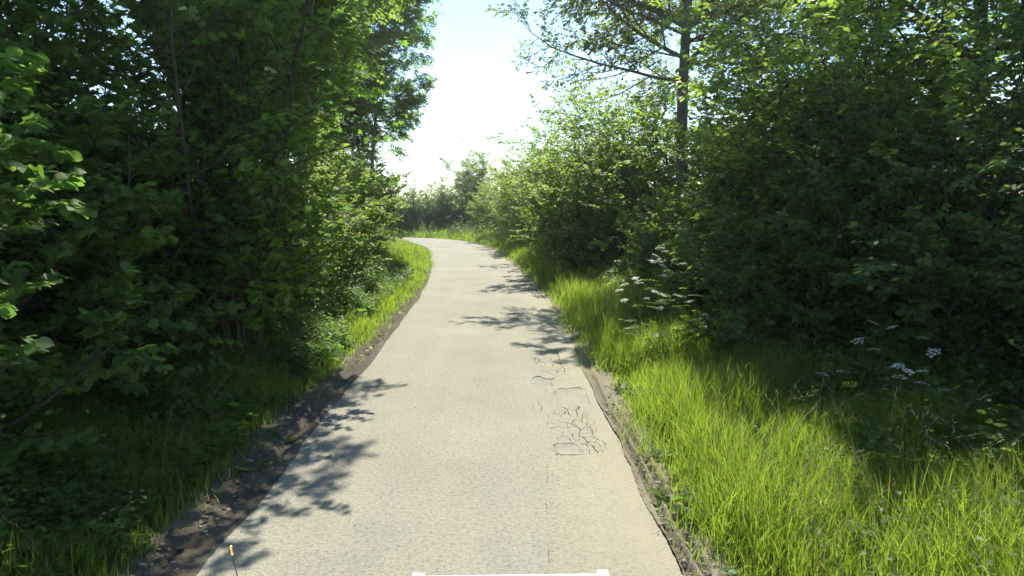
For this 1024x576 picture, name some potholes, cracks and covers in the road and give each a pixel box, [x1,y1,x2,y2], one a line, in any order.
pothole [531,376,555,387]
pothole [552,443,584,454]
pothole [555,387,590,406]
crack [527,339,610,455]
